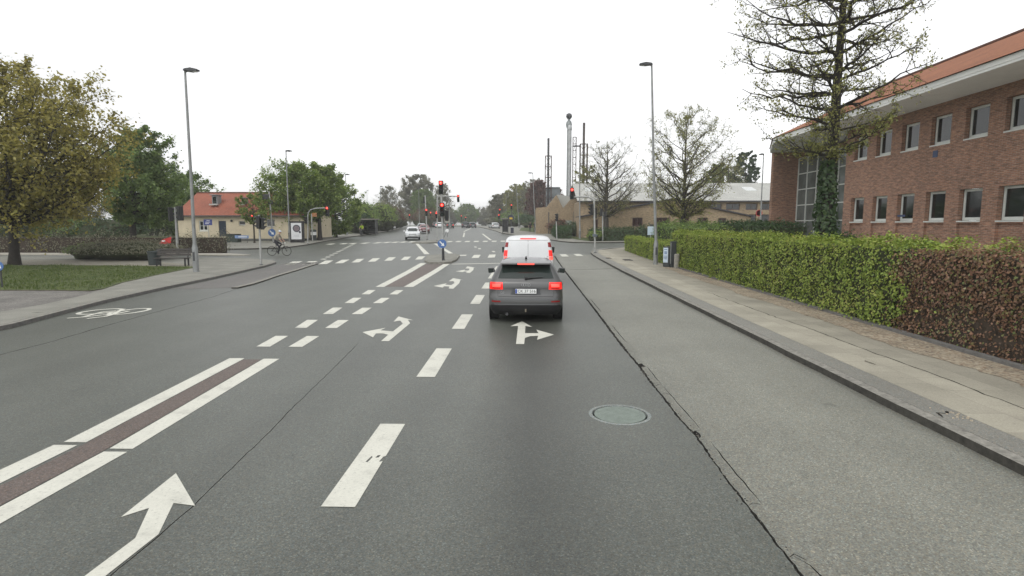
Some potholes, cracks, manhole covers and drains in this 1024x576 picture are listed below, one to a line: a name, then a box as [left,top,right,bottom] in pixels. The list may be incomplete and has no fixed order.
manhole cover [589,404,651,425]
